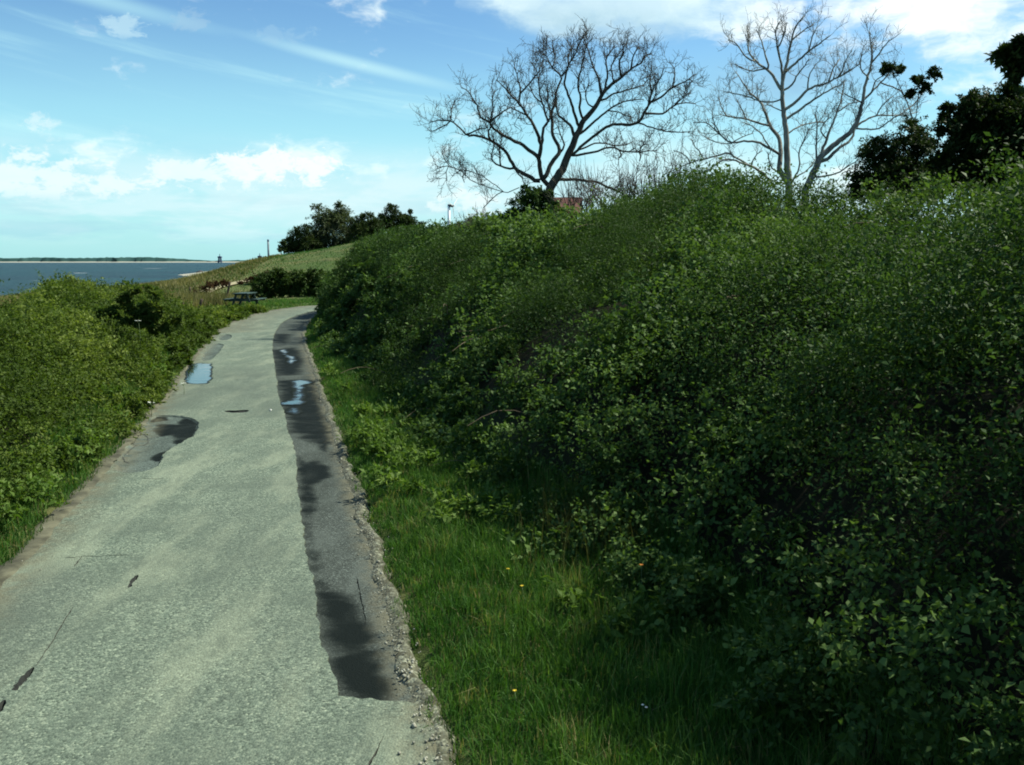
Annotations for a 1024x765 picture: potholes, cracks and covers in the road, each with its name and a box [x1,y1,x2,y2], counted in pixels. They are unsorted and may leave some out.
pothole [12,667,34,690]
crack [36,607,73,666]
crack [368,736,384,765]
